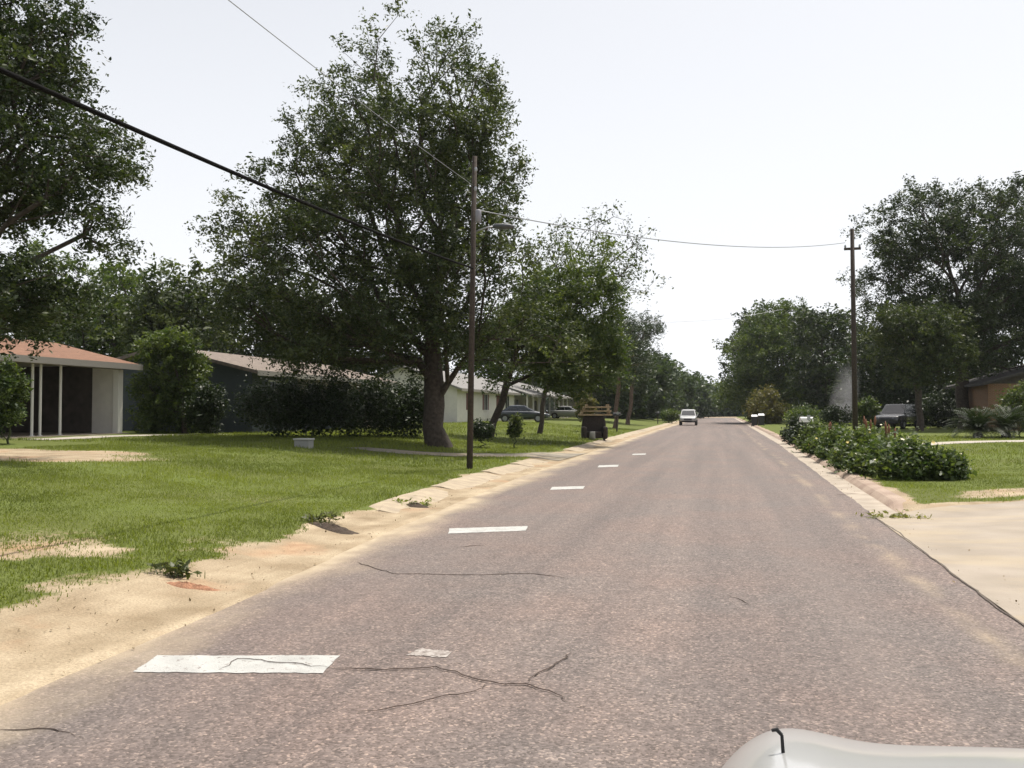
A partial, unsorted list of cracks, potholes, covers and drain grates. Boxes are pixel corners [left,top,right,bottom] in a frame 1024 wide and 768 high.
crack [360,563,564,578]
crack [222,653,594,711]
crack [0,727,81,737]
